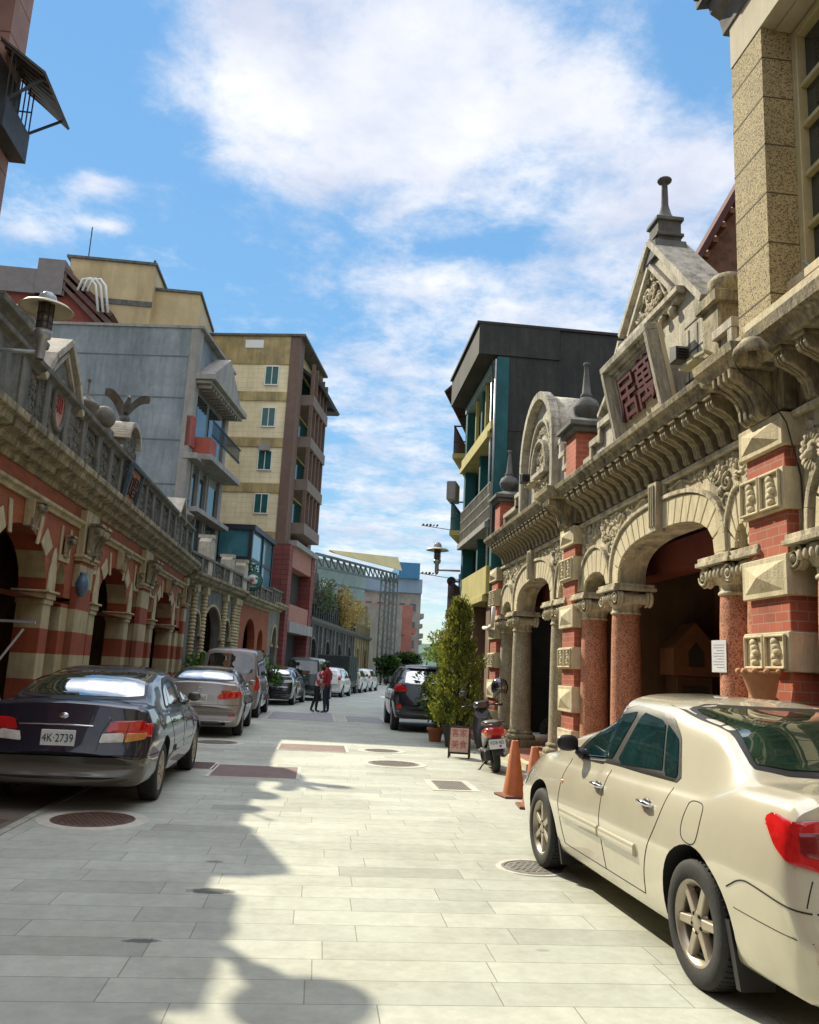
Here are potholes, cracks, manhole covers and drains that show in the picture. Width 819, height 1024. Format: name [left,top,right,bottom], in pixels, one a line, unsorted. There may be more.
manhole cover [496,859,568,877]
manhole cover [35,810,149,831]
manhole cover [360,760,427,768]
drain grate [423,779,481,792]
